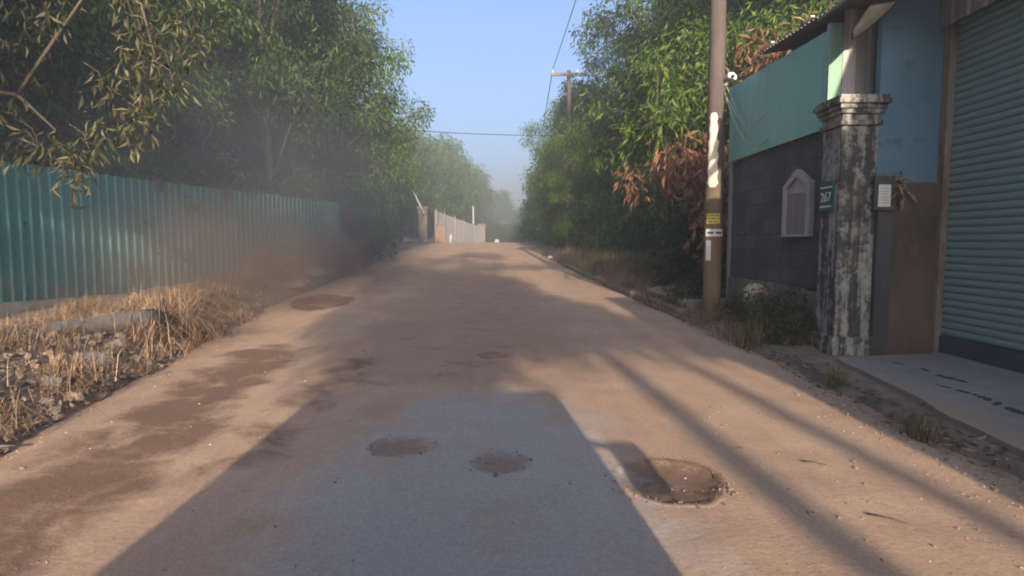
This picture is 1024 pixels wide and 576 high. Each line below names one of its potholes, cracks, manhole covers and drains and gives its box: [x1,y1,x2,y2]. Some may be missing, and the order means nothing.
pothole [469,448,533,476]
pothole [286,294,357,312]
pothole [605,456,738,509]
pothole [362,433,438,458]
pothole [475,352,511,360]
